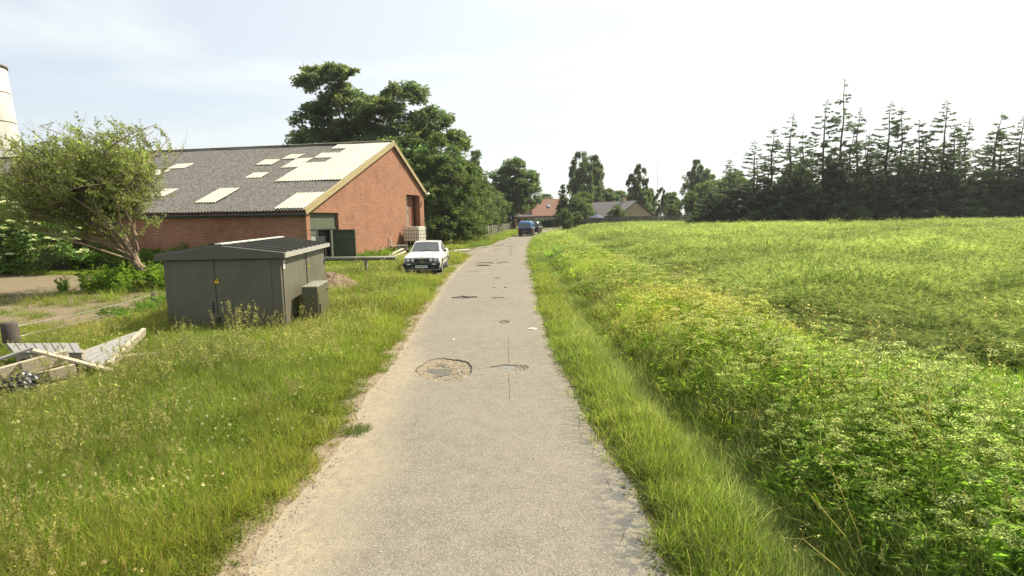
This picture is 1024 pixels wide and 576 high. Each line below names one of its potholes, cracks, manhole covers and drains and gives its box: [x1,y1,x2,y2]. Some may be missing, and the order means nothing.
pothole [415,358,472,382]
